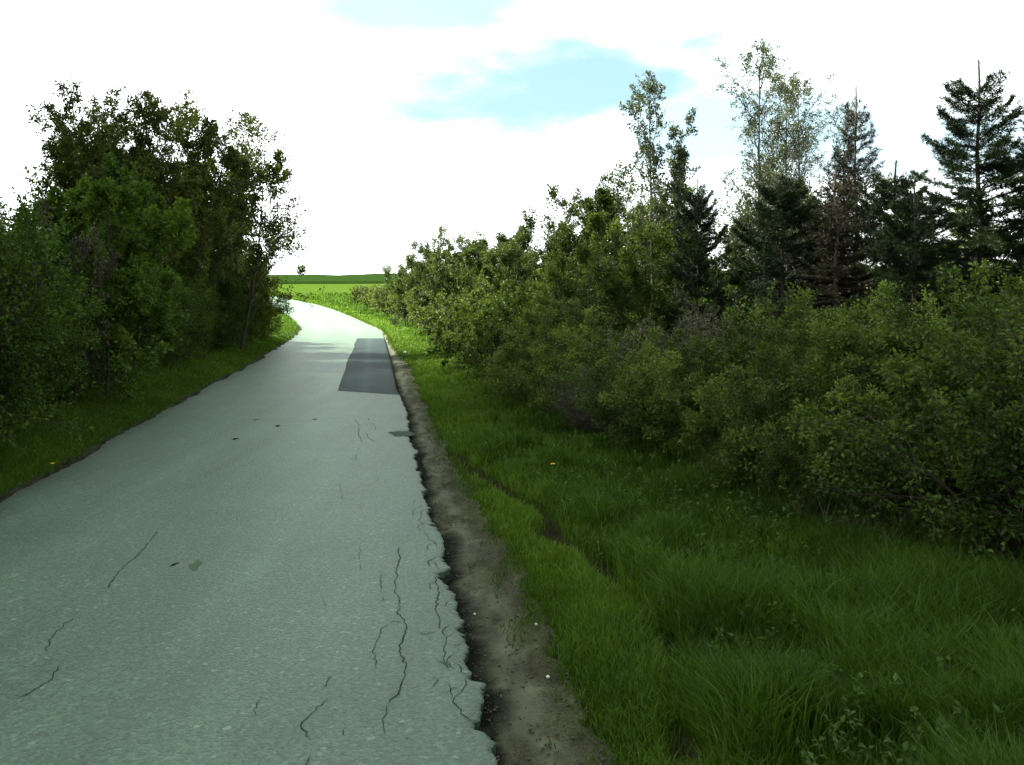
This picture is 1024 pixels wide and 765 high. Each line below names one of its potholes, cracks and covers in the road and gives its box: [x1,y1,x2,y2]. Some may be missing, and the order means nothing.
crack [300,674,333,765]
crack [21,619,73,697]
crack [367,500,474,731]
